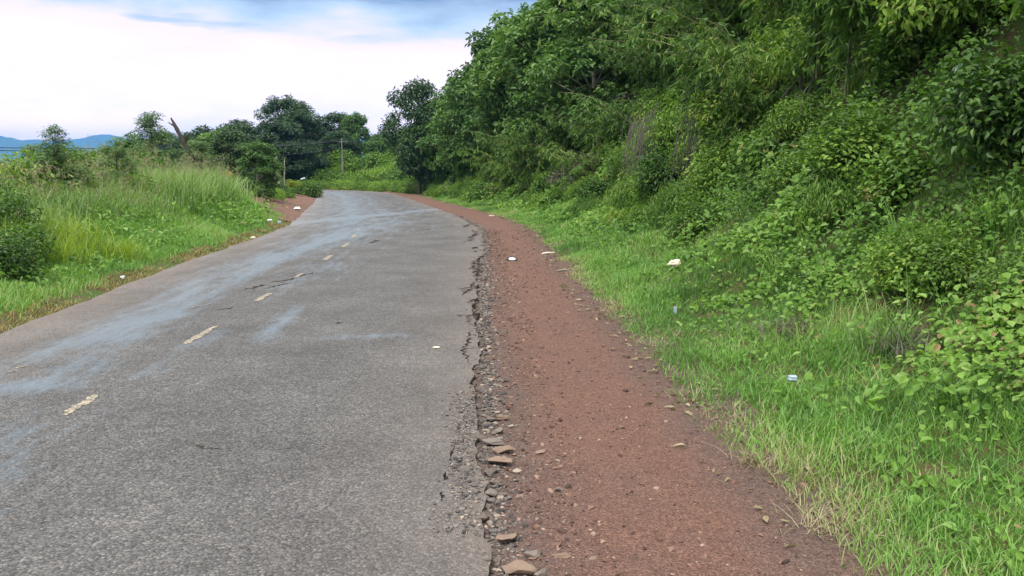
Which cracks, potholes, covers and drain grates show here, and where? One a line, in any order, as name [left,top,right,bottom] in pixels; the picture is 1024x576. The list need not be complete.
crack [456,216,483,365]
crack [440,400,478,501]
crack [244,273,313,290]
